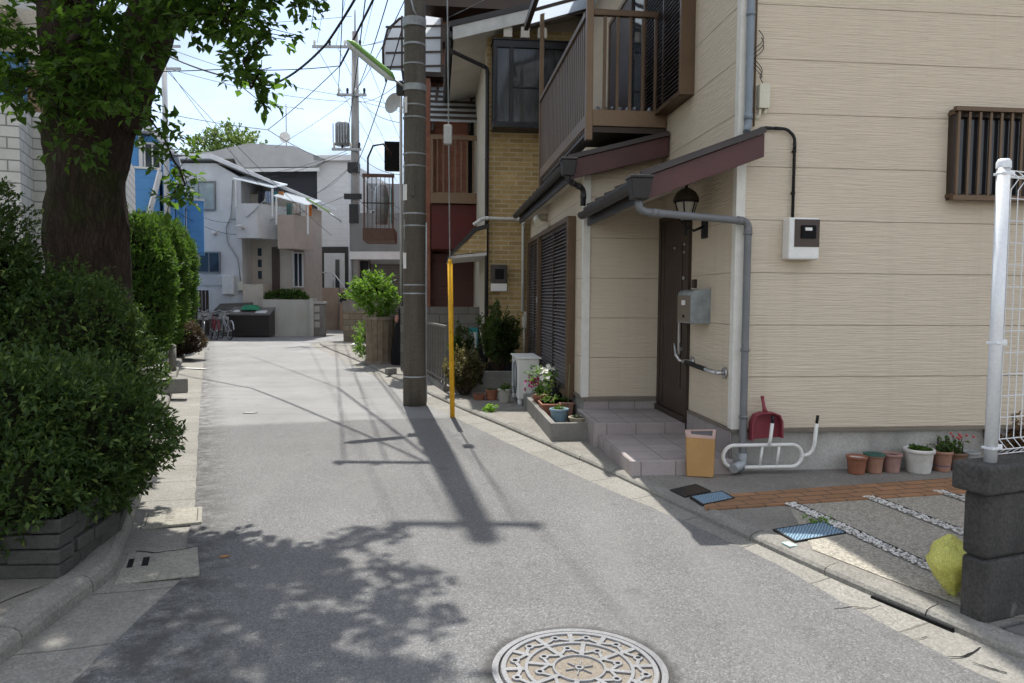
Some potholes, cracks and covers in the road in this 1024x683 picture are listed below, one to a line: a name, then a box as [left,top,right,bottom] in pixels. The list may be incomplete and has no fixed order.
crack [950,647,1007,673]
utility cover [670,484,711,498]
manhole cover [491,628,669,683]
drain grate [870,595,955,633]
